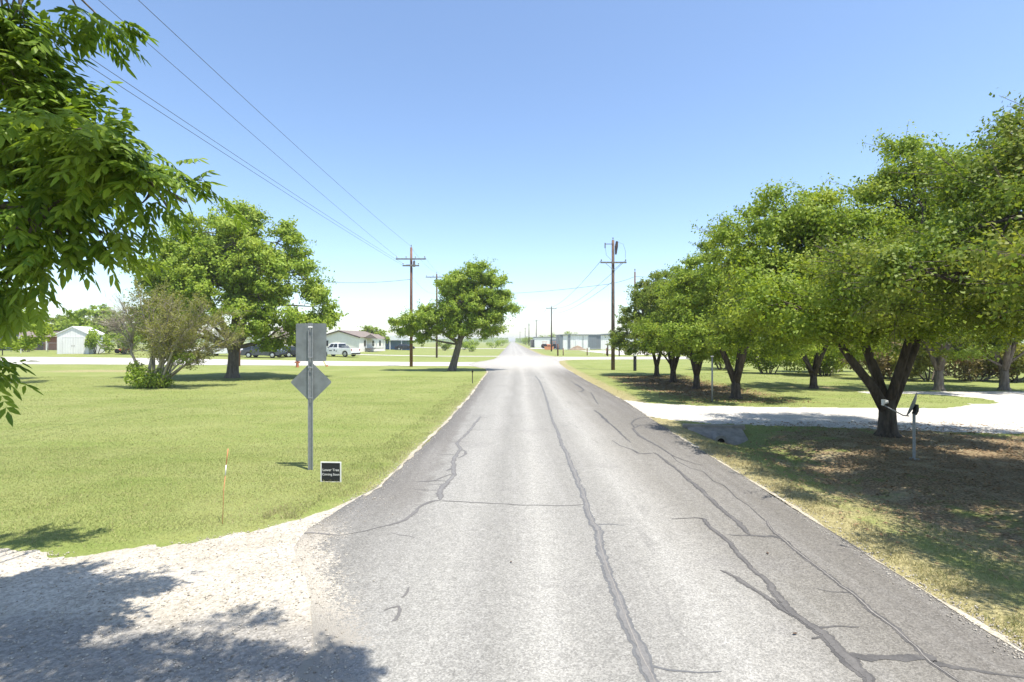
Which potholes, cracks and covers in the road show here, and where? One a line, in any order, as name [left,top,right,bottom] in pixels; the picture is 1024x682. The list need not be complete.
crack [562,381,700,465]
crack [766,520,1024,682]
